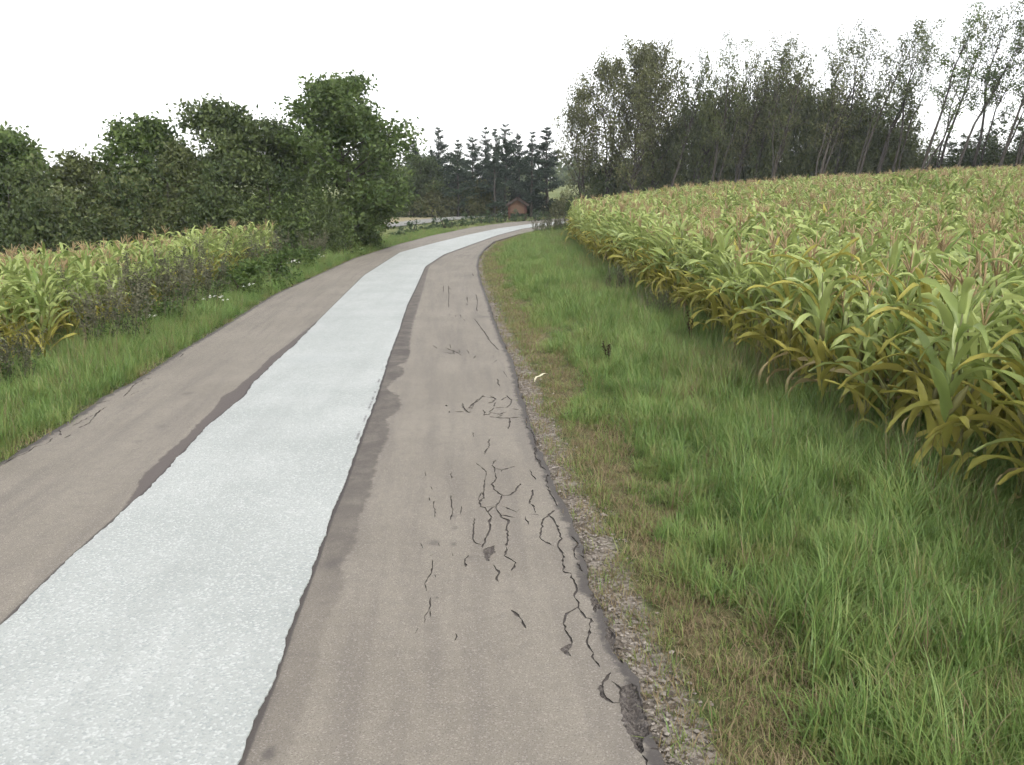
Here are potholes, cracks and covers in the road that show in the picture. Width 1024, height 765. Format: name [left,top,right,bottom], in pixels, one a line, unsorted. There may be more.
crack [3,378,150,465]
pothole [619,683,650,754]
crack [415,286,621,703]
